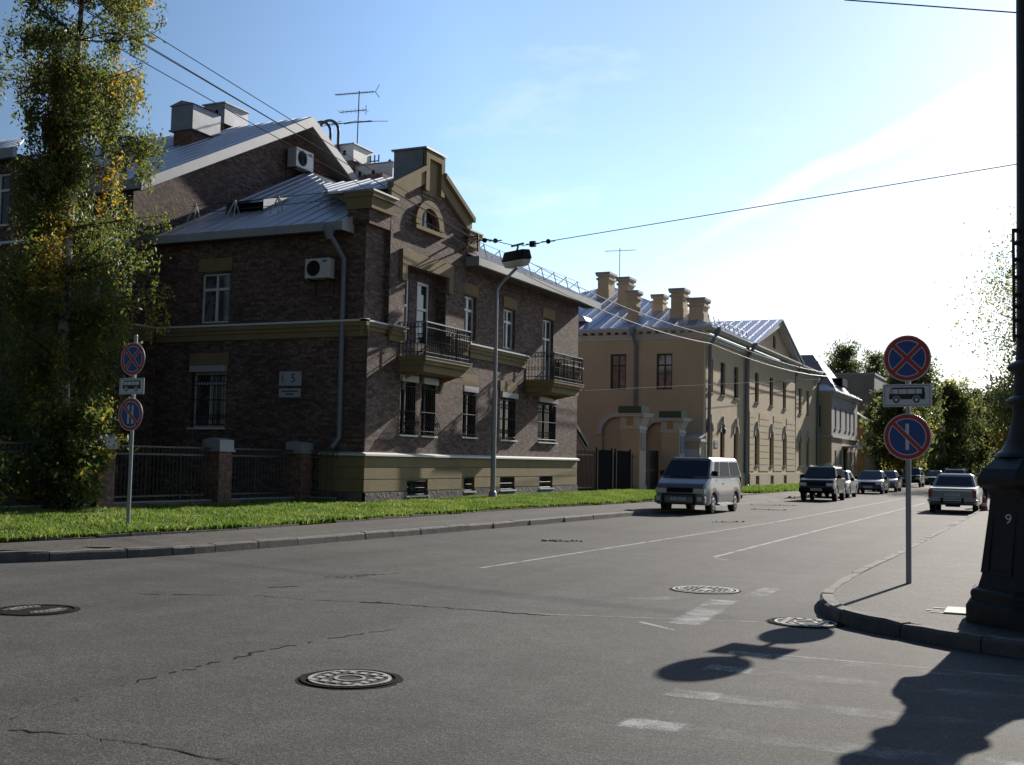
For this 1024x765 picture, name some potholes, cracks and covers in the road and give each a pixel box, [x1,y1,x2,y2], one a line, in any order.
manhole cover [765,617,845,629]
manhole cover [670,586,742,594]
manhole cover [0,604,81,616]
crack [172,586,542,615]
crack [17,729,238,765]
crack [10,629,393,719]
manhole cover [295,669,403,690]
